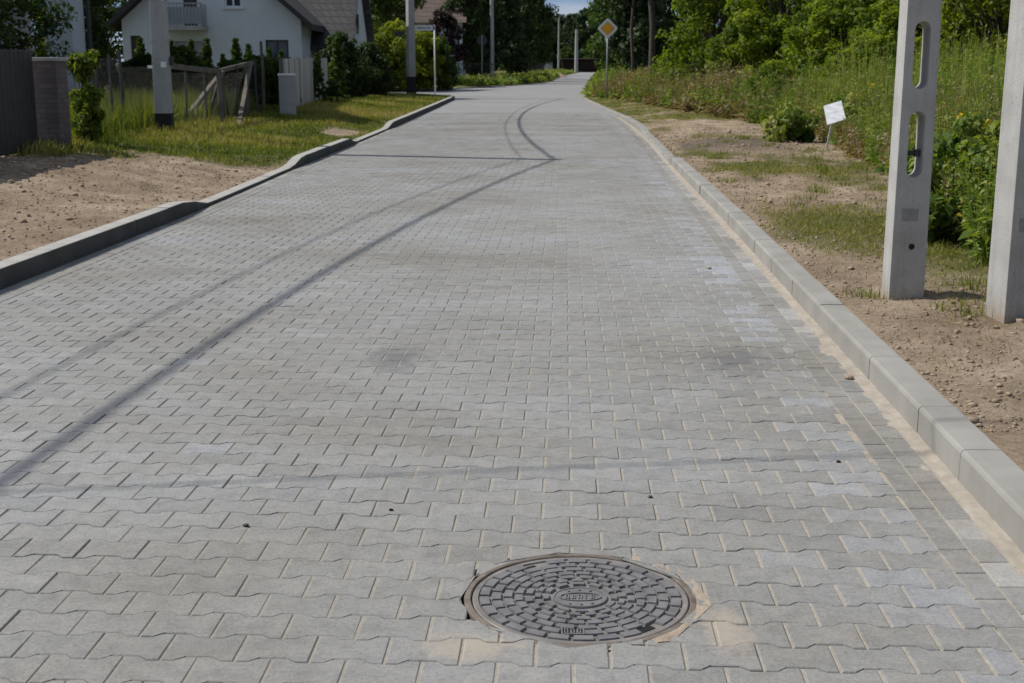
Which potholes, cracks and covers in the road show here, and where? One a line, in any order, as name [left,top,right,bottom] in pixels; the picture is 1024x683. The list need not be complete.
manhole cover [462,554,712,652]
